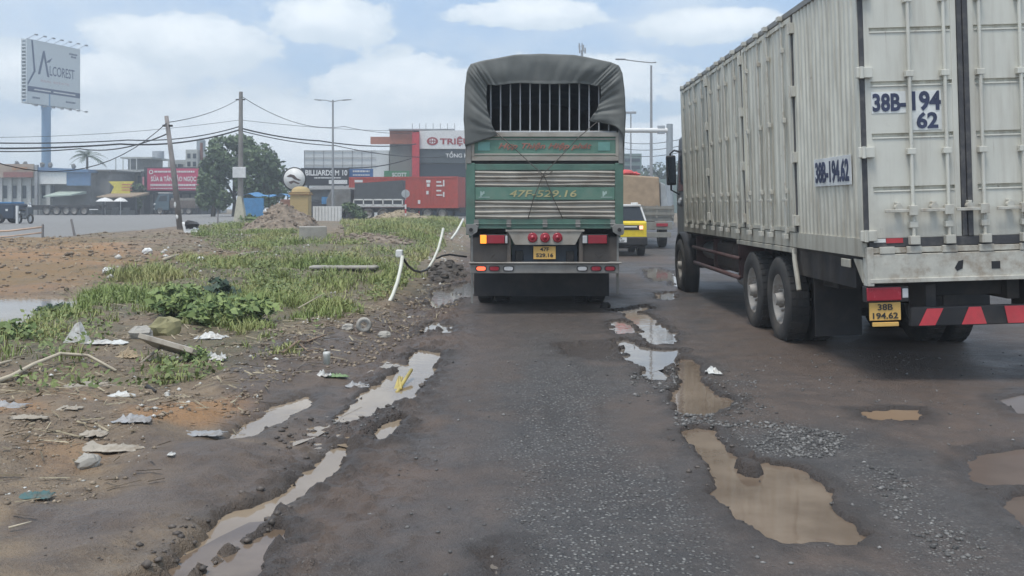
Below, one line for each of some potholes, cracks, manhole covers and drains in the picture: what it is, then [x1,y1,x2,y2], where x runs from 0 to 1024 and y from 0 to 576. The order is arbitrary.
pothole [612,312,691,347]
pothole [336,407,423,447]
pothole [660,423,900,556]
pothole [317,345,454,428]
pothole [90,434,371,576]
pothole [597,336,653,352]
pothole [938,437,1024,500]
pothole [838,405,943,425]
pothole [627,365,681,384]
pothole [651,355,753,420]
pothole [613,345,695,372]
